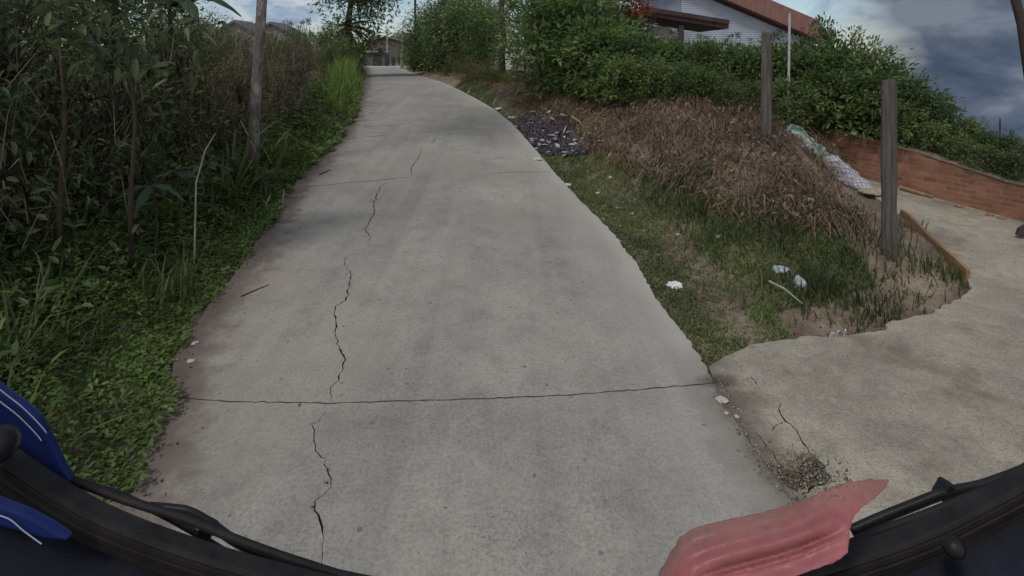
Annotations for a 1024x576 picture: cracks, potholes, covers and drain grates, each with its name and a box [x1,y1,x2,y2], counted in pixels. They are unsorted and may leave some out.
crack [759,403,832,495]
crack [311,140,435,563]
